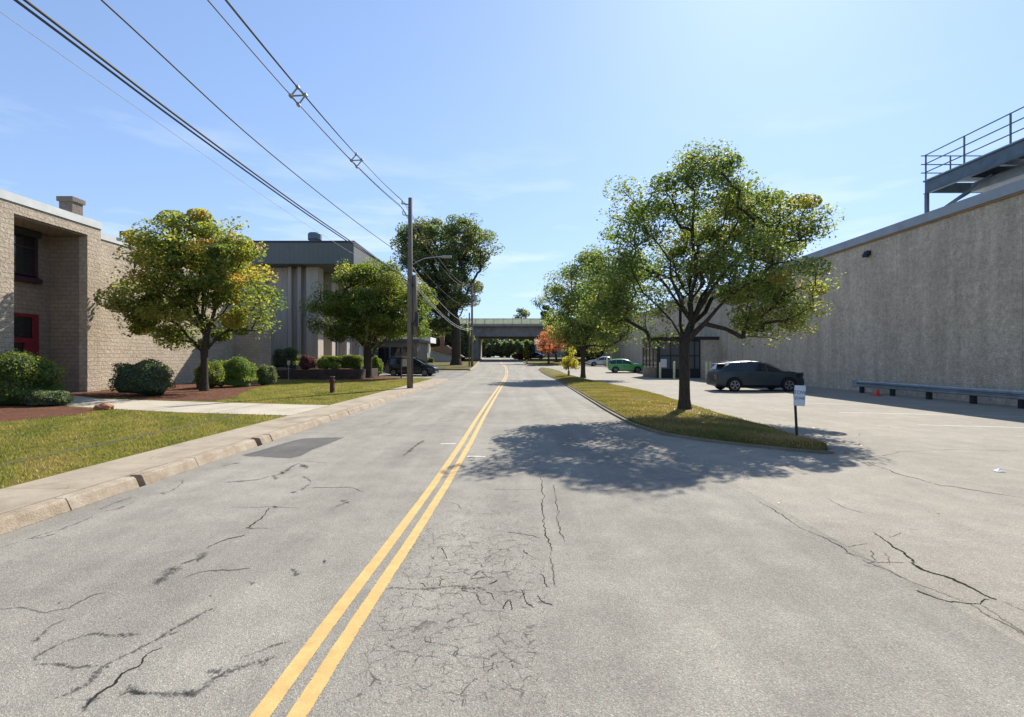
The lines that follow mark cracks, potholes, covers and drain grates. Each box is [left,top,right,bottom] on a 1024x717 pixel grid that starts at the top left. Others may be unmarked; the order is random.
crack [224,461,360,507]
crack [847,529,1024,633]
crack [382,532,555,705]
crack [154,507,297,583]
crack [15,594,283,711]
